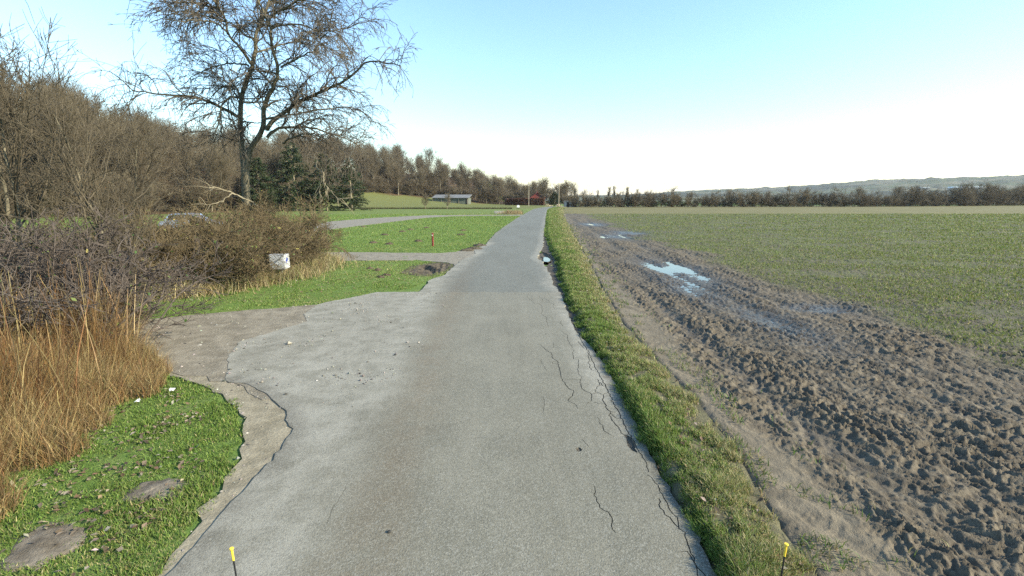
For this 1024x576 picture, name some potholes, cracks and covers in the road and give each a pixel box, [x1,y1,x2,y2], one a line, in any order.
crack [529,297,706,576]
